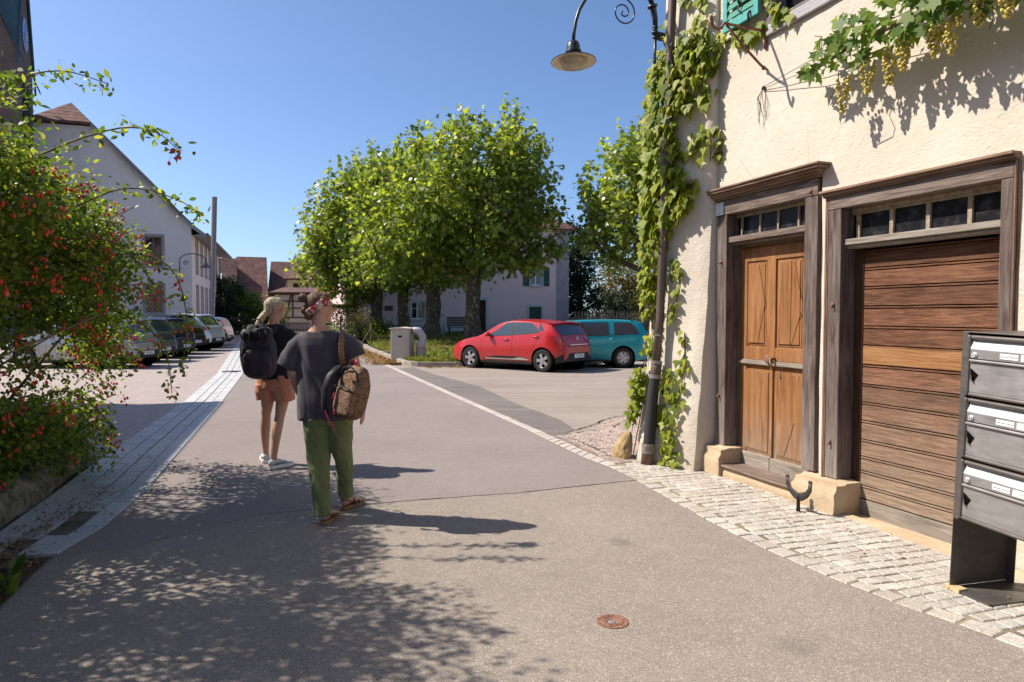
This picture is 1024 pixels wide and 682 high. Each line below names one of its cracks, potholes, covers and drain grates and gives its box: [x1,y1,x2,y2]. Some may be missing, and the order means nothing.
manhole cover [596,614,629,629]
